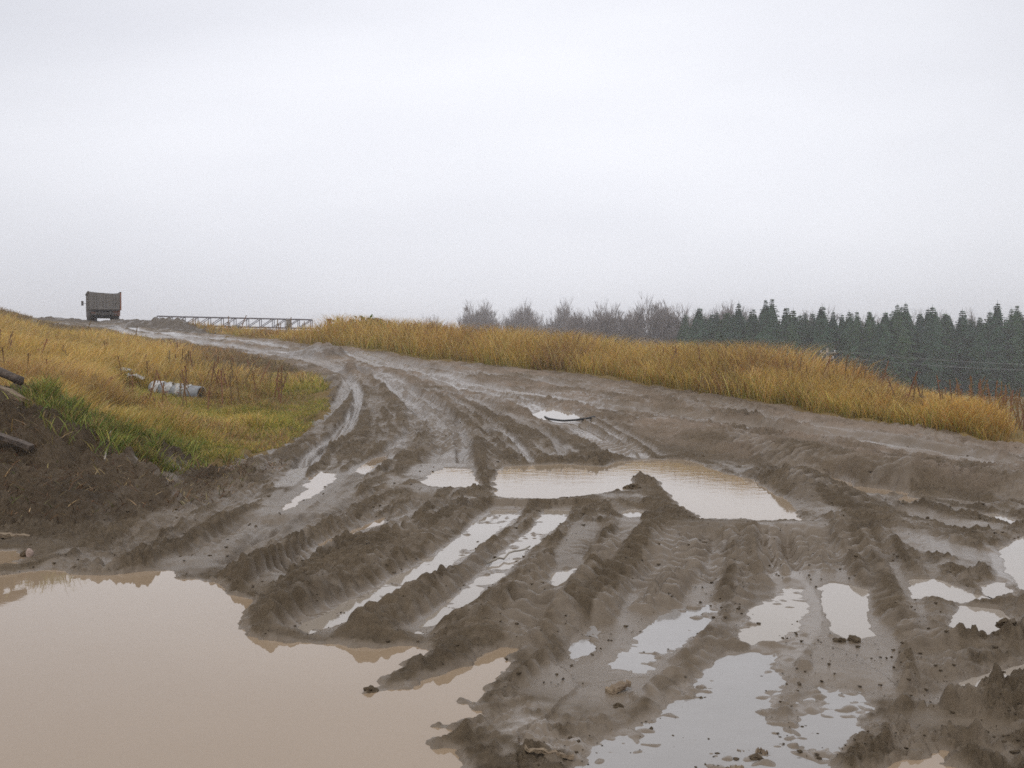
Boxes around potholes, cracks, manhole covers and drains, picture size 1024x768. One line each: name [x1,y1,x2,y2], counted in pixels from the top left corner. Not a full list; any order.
pothole [0,556,529,768]
pothole [805,577,895,641]
pothole [483,454,818,522]
